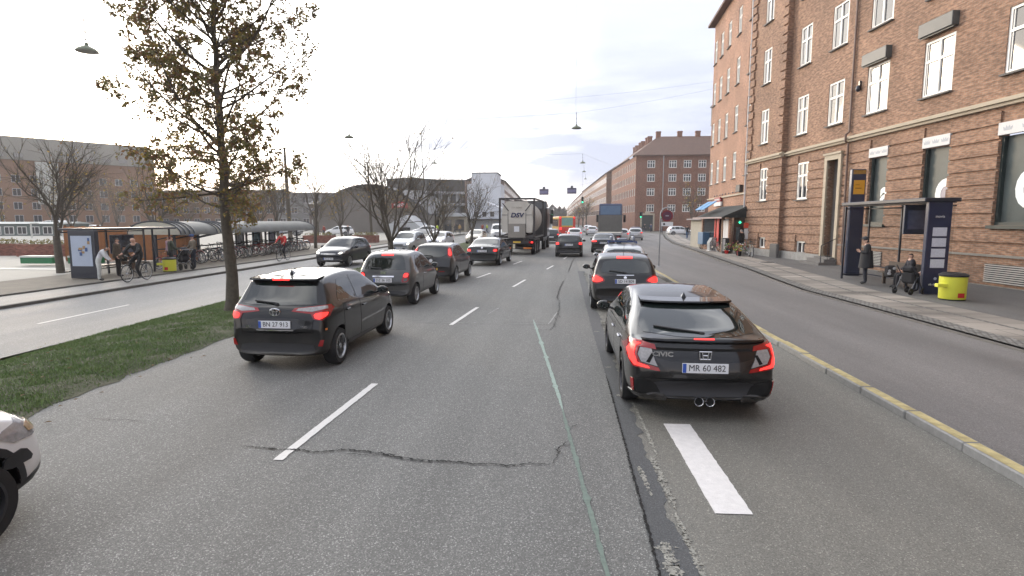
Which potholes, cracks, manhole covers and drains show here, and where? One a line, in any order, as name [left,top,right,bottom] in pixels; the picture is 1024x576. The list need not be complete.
crack [246,424,577,466]
